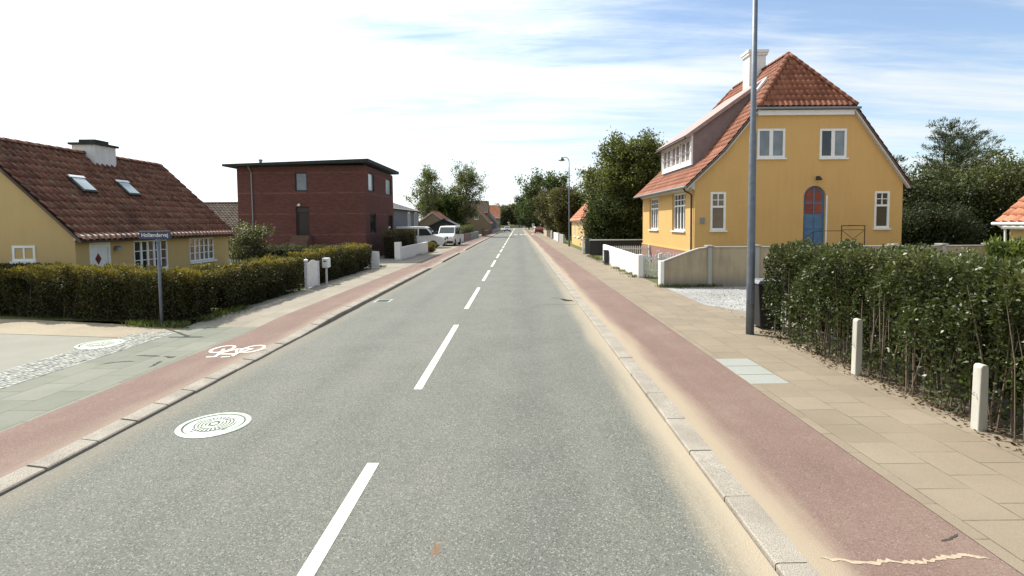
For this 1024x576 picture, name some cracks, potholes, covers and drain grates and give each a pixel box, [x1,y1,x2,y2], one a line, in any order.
crack [820,534,990,565]
manhole cover [174,412,252,439]
manhole cover [74,339,126,349]
